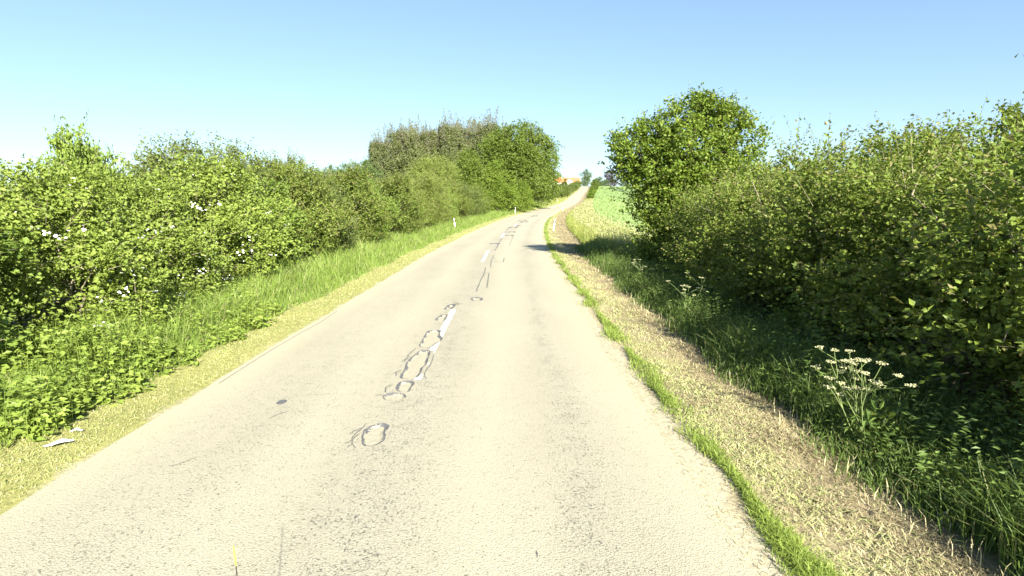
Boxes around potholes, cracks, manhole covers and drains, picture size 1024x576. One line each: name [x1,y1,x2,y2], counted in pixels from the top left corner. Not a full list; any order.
pothole [396,380,415,392]
pothole [419,330,443,348]
pothole [361,423,390,446]
pothole [383,393,406,401]
pothole [399,350,430,379]
